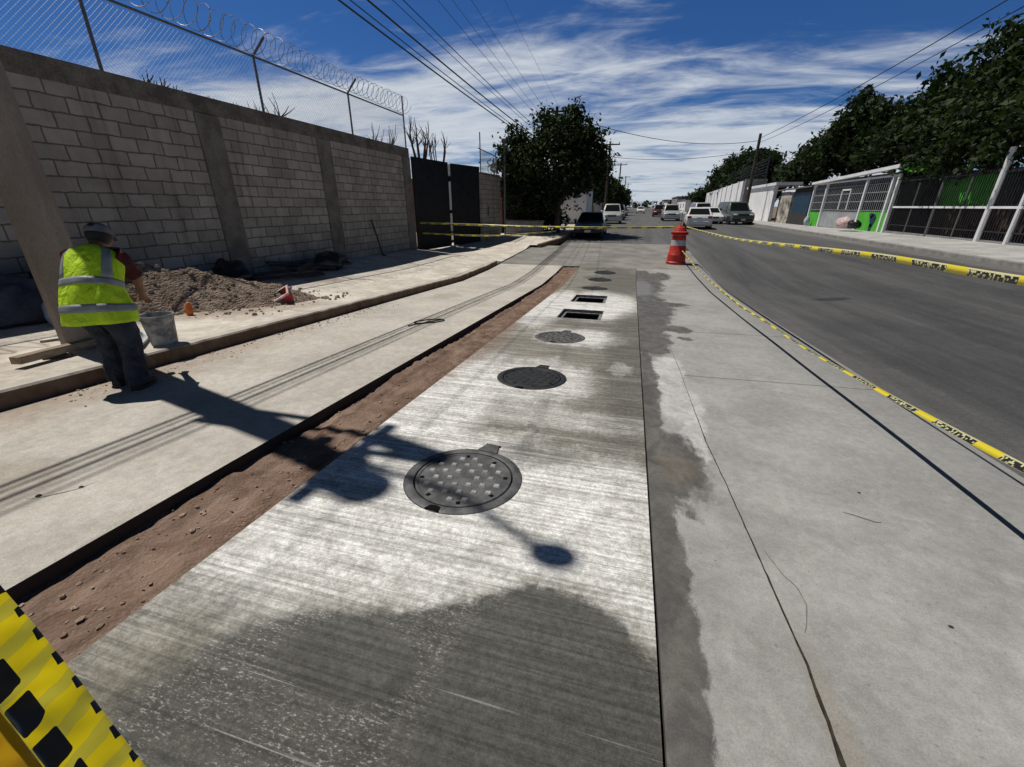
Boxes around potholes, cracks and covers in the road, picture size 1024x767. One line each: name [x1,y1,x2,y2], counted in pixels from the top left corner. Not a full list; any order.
manhole cover [404,443,522,515]
manhole cover [535,330,585,343]
manhole cover [497,365,566,390]
